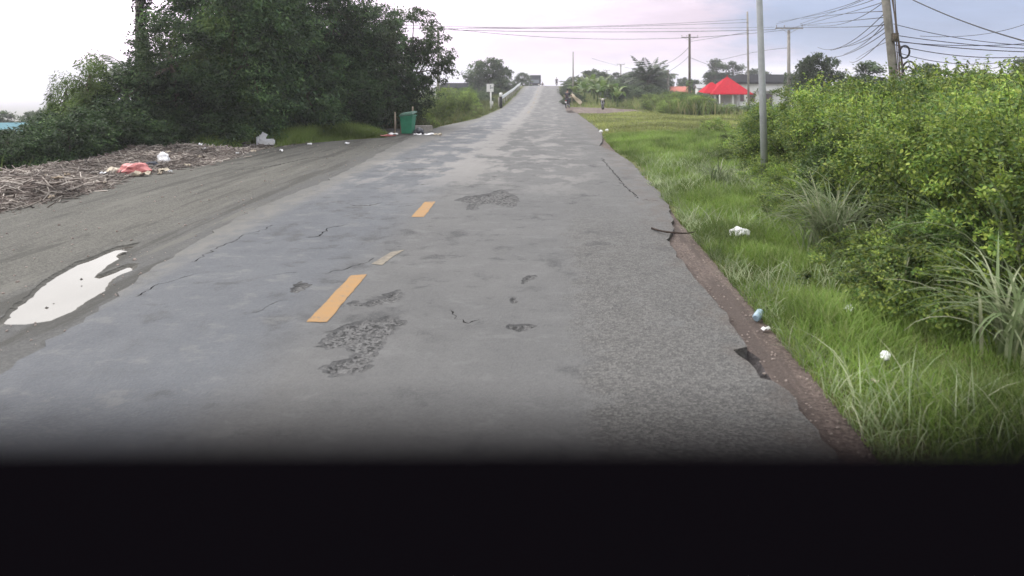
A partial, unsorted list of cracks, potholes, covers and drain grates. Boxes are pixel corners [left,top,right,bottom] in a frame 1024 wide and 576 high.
pothole [506,324,537,332]
pothole [346,289,405,307]
pothole [745,351,772,381]
crack [138,225,272,296]
pothole [455,189,520,210]
pothole [314,315,408,378]
pothole [290,281,313,293]
